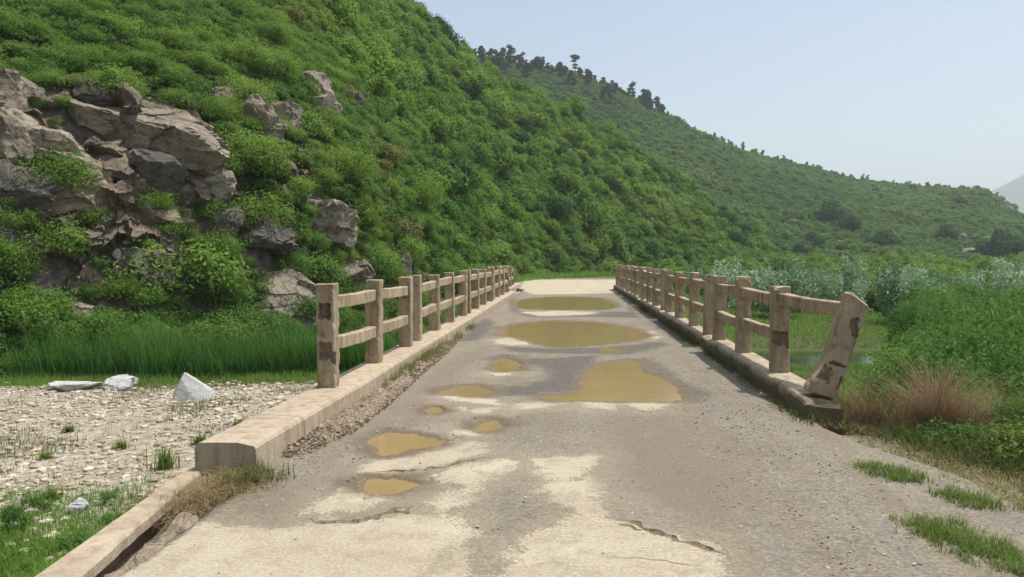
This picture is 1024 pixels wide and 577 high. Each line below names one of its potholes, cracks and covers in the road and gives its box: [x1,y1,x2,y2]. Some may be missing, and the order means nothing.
pothole [356,475,424,495]
pothole [512,296,620,310]
pothole [489,357,525,372]
crack [310,507,412,524]
pothole [435,384,500,397]
pothole [361,430,450,456]
pothole [495,320,652,347]
crack [614,520,724,565]
pothole [470,418,509,431]
pothole [539,359,687,402]
pothole [423,405,446,414]
